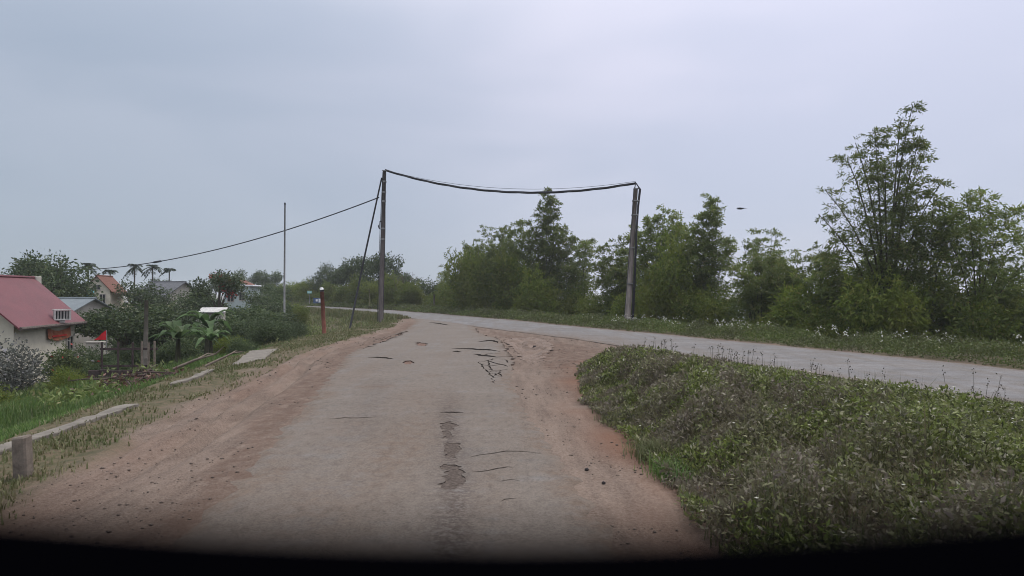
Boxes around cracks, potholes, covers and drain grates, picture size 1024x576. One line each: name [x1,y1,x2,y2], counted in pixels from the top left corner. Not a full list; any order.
pothole [438,464,466,490]
pothole [444,443,462,458]
pothole [440,422,458,438]
crack [454,340,508,382]
